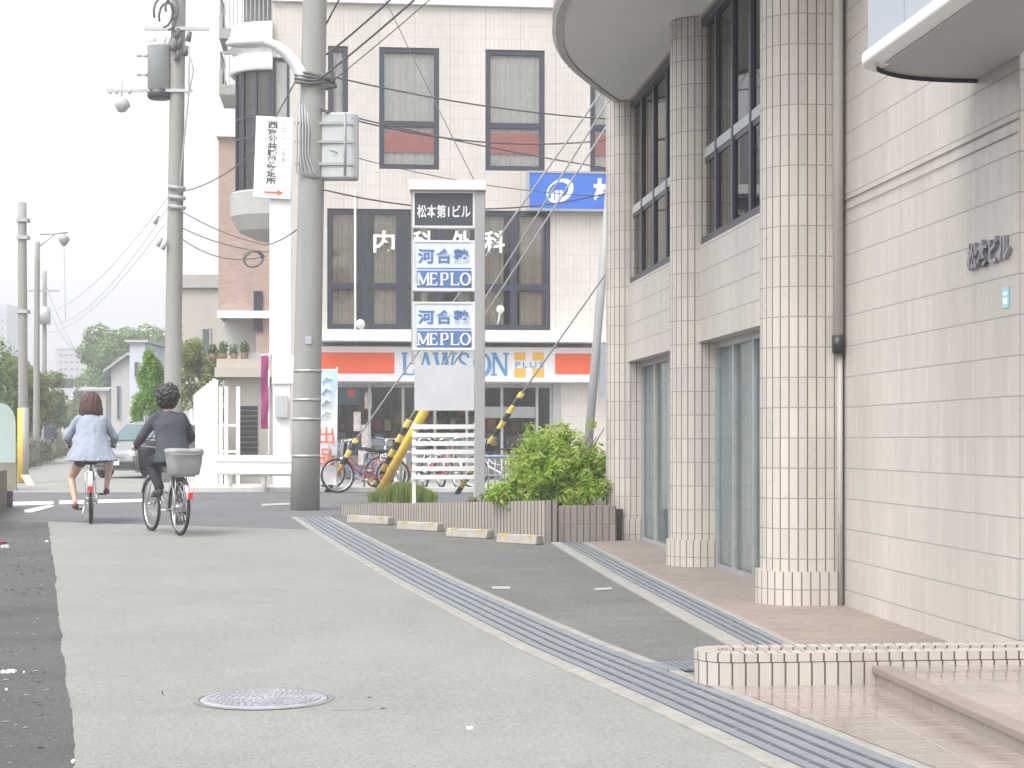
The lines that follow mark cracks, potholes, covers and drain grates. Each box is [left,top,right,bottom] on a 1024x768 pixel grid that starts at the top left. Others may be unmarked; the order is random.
manhole cover [192,689,335,711]
